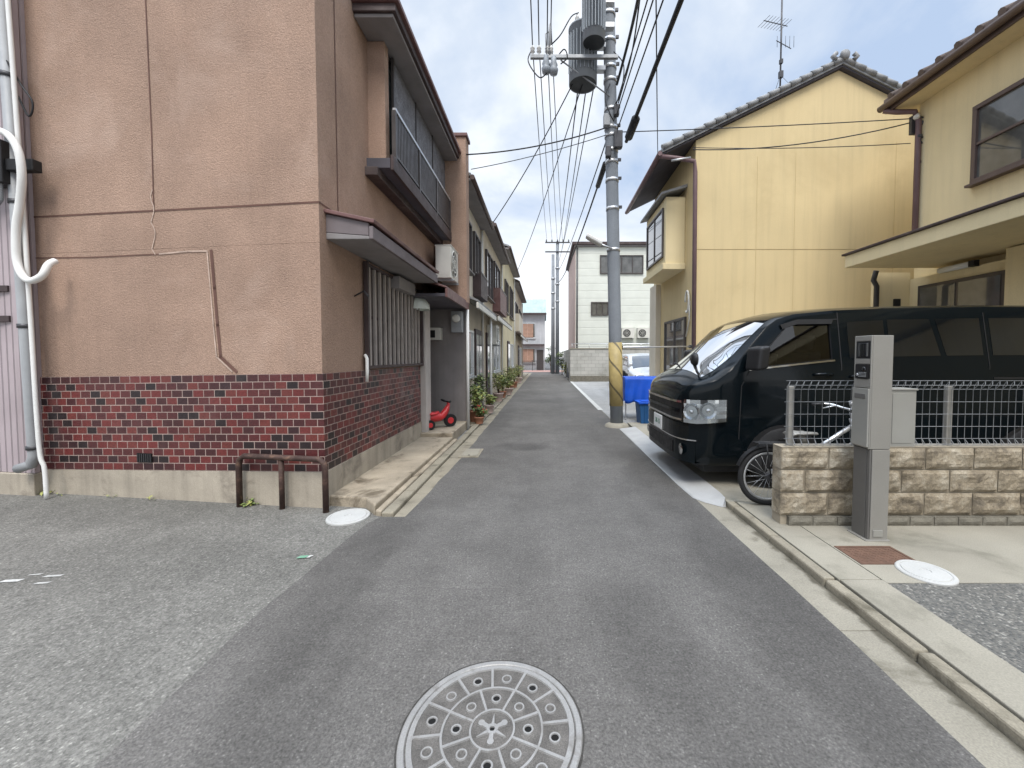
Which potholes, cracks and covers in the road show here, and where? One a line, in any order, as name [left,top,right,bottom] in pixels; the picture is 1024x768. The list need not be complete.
manhole cover [325,508,370,526]
manhole cover [834,546,917,565]
manhole cover [394,660,585,768]
manhole cover [894,560,959,587]
